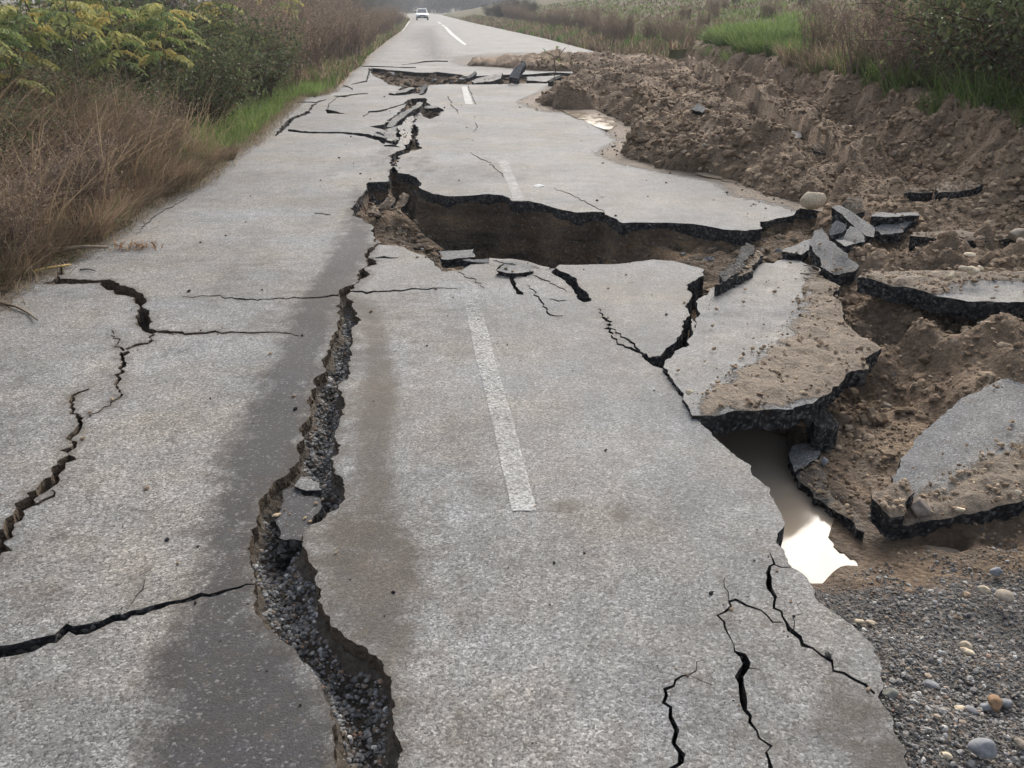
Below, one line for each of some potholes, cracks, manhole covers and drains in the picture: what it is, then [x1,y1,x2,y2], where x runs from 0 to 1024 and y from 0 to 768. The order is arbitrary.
pothole [351,166,822,293]
crack [275,60,448,144]
crack [0,238,704,768]
pothole [370,68,572,91]
crack [662,552,875,768]
